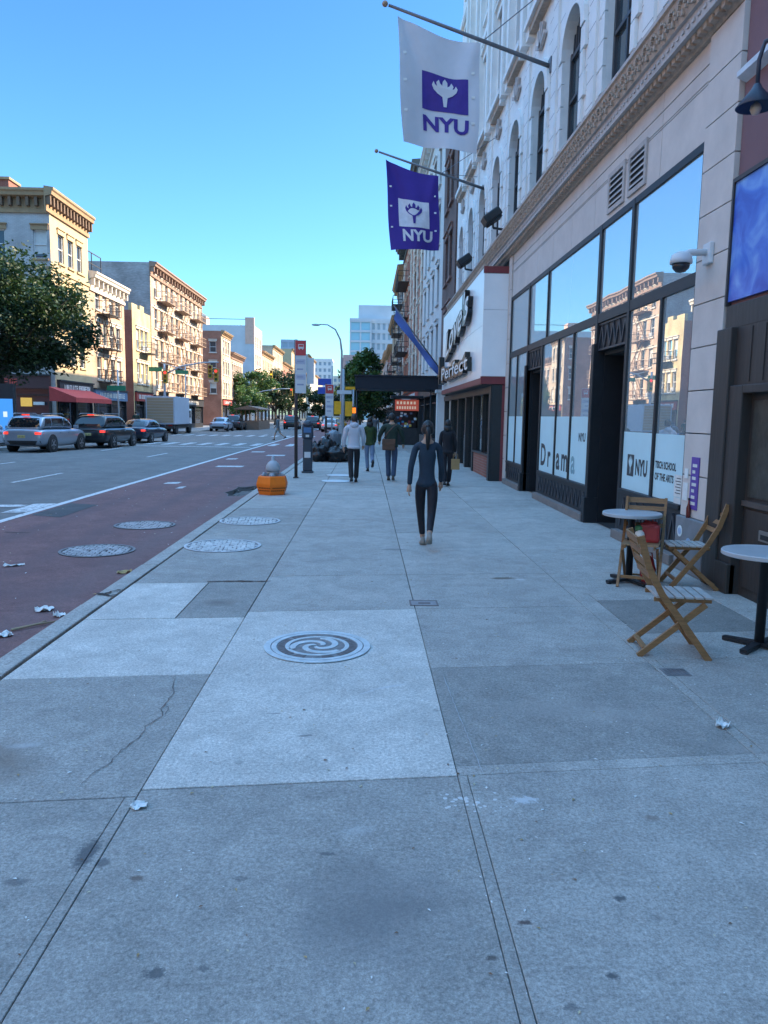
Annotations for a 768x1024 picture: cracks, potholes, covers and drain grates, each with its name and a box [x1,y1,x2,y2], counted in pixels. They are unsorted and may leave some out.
manhole cover [184,539,261,553]
crack [81,675,176,784]
manhole cover [114,521,175,530]
manhole cover [219,517,280,526]
manhole cover [58,544,136,558]
utility cover [659,668,692,677]
manhole cover [264,630,370,663]
